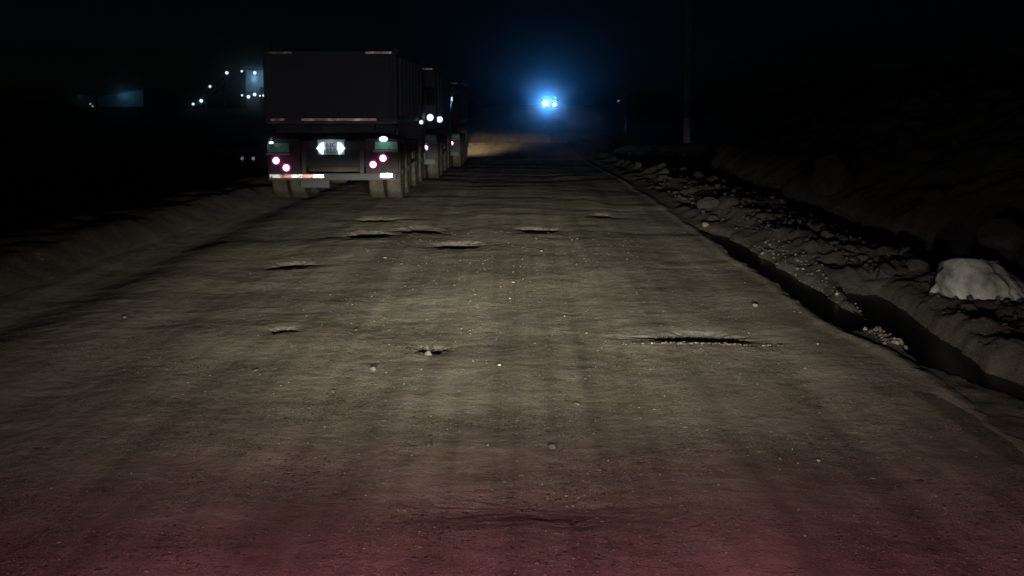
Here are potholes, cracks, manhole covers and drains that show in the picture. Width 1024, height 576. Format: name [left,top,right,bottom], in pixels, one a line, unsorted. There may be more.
pothole [611,328,777,345]
pothole [416,239,496,251]
pothole [262,259,328,270]
pothole [261,325,306,335]
pothole [335,229,403,239]
pothole [407,344,458,355]
pothole [505,226,569,234]
pothole [384,224,455,236]
